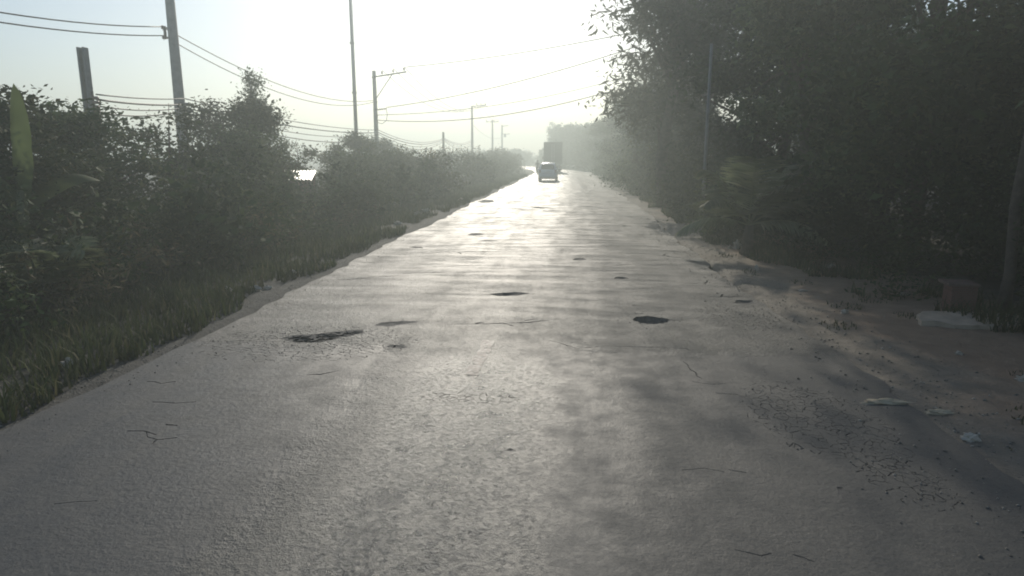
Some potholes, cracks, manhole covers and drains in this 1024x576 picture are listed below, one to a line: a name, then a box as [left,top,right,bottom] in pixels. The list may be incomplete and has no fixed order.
crack [549,340,738,395]
crack [739,383,959,511]
pothole [633,316,673,324]
pothole [281,329,365,343]
